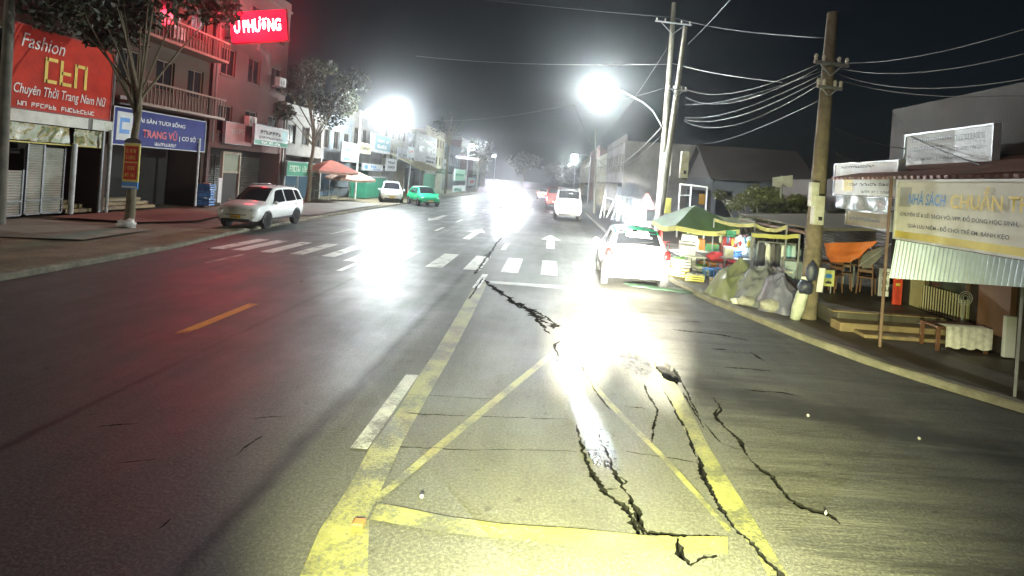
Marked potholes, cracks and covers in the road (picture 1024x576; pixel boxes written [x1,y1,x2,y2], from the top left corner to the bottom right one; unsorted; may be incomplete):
pothole [654,362,683,385]
crack [672,321,768,371]
crack [411,370,840,576]
crack [485,280,560,357]
